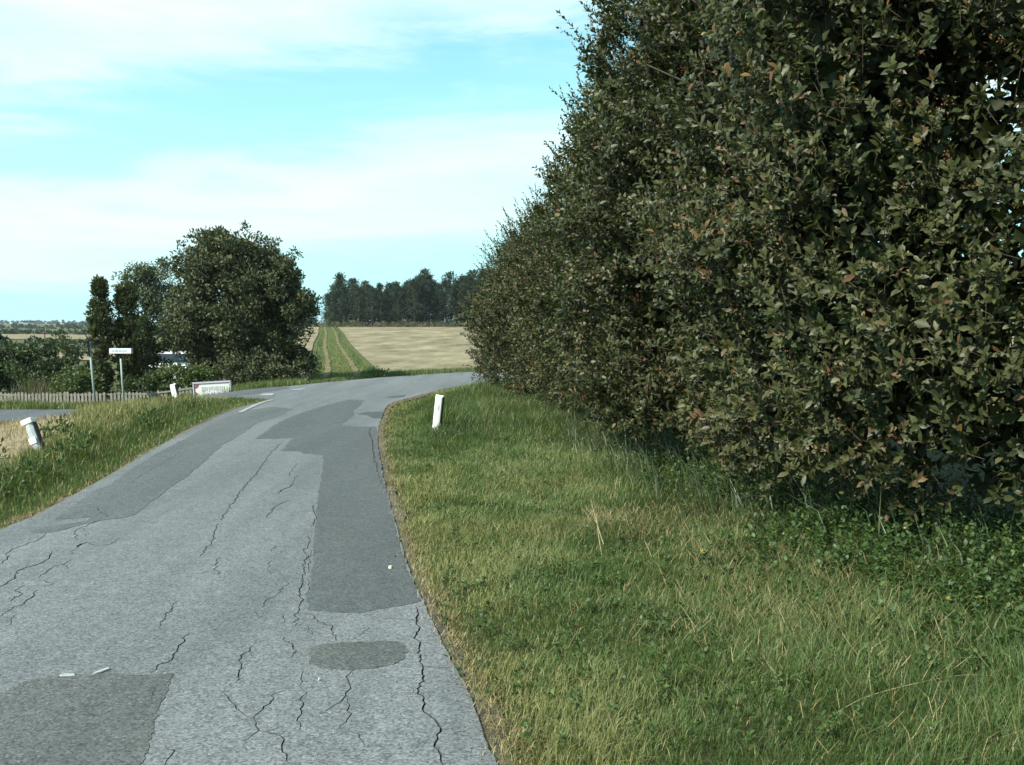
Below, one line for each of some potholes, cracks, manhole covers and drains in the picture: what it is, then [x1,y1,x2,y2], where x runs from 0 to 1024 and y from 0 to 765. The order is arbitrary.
crack [0,509,119,627]
crack [200,444,280,575]
crack [151,600,190,701]
crack [325,669,365,746]
crack [223,505,336,764]
